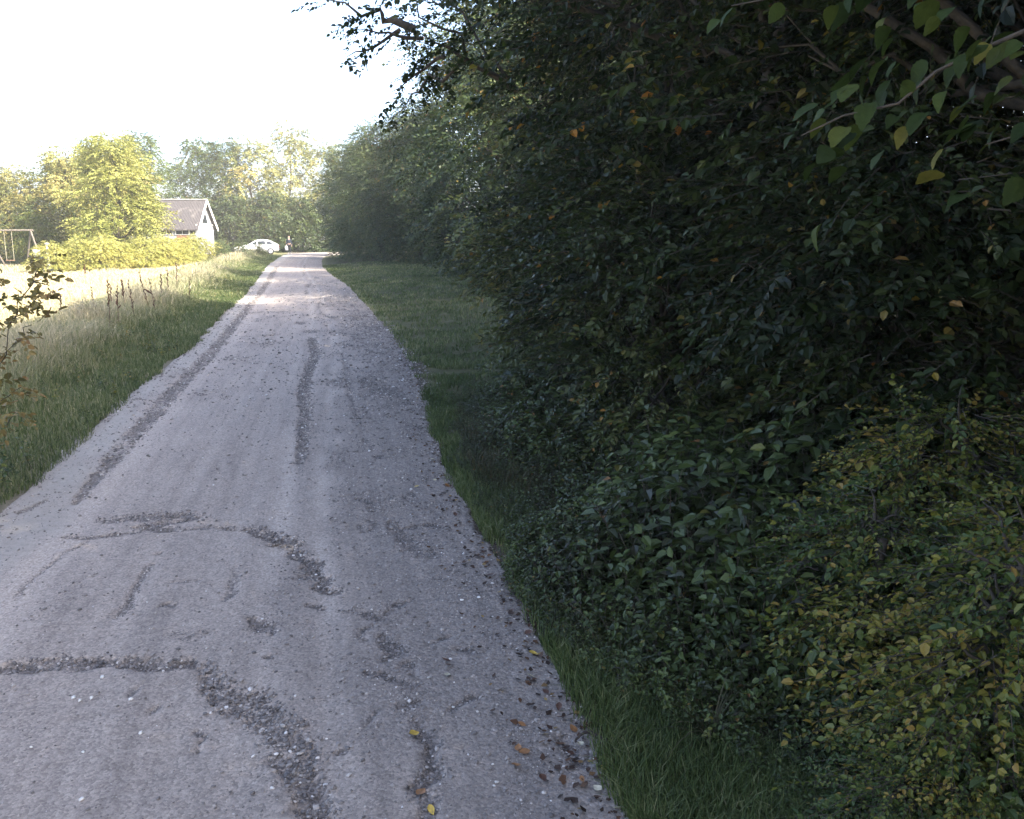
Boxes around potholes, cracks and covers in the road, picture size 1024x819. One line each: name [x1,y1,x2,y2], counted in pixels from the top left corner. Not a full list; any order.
crack [15,522,252,598]
